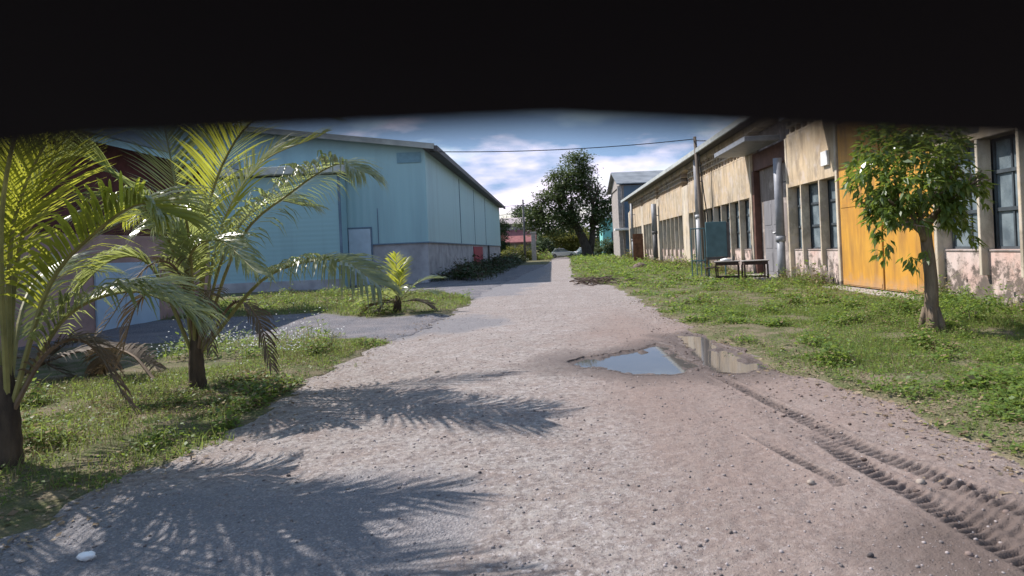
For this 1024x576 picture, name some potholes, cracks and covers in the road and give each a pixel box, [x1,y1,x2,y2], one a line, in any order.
pothole [563,342,704,375]
pothole [675,332,768,374]
